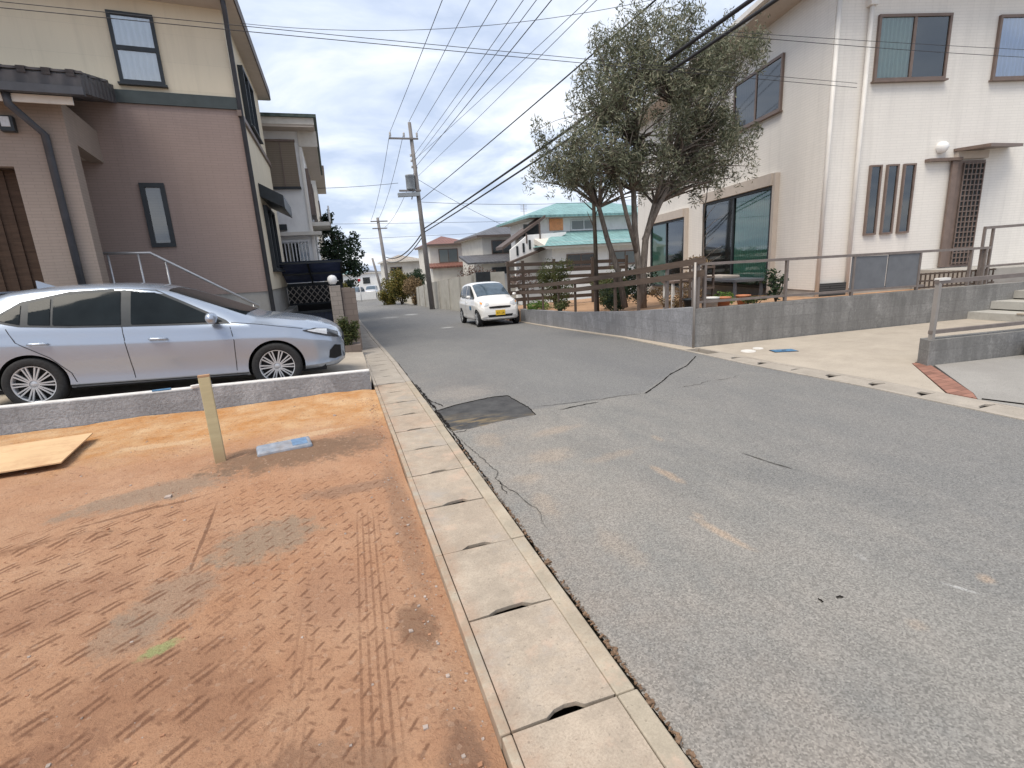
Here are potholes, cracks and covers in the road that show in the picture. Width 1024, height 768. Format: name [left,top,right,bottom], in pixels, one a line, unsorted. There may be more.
crack [457,429,547,528]
